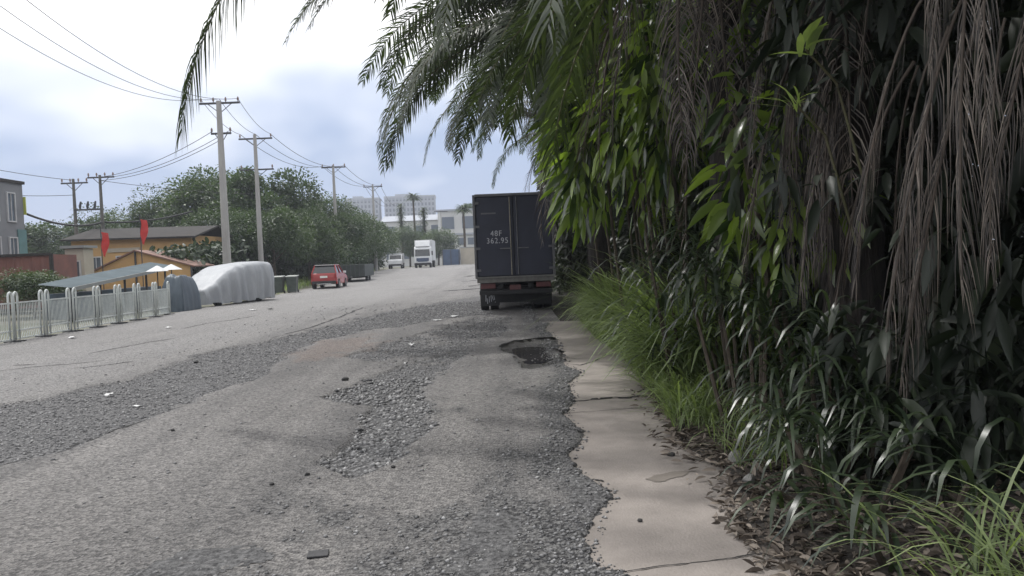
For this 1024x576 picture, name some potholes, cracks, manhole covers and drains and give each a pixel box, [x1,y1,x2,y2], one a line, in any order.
crack [276,307,363,337]
pothole [499,337,567,369]
pothole [329,396,429,477]
